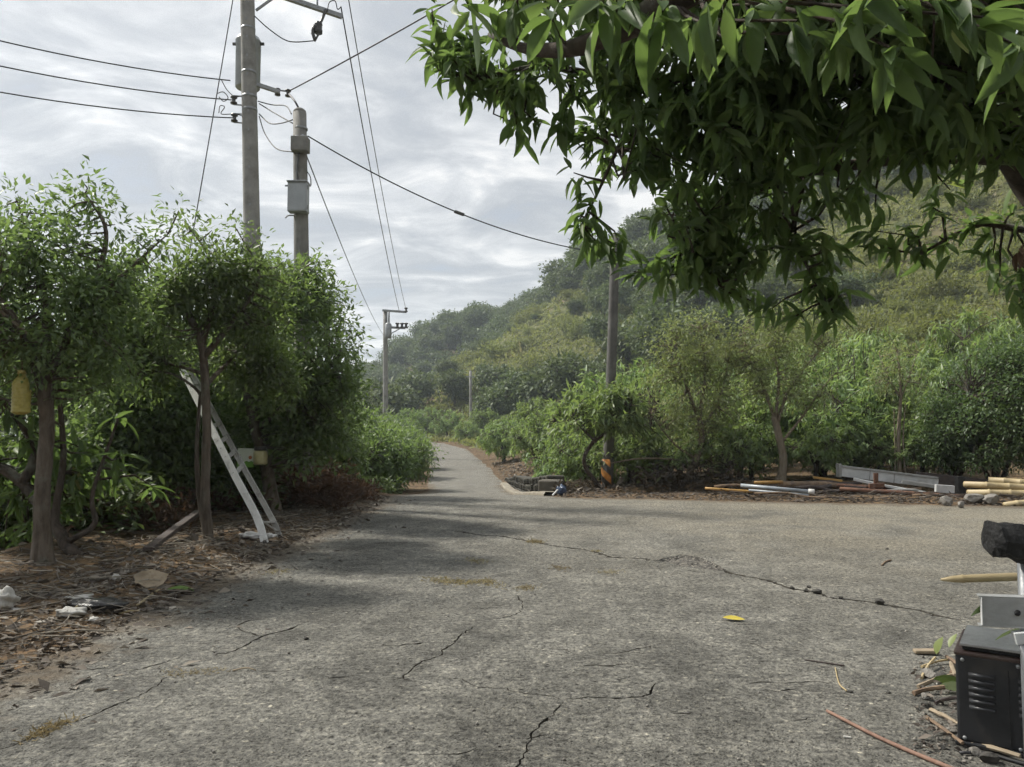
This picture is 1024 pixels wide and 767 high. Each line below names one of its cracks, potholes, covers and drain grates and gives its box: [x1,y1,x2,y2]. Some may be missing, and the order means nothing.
crack [385,627,656,767]
crack [209,618,300,654]
crack [0,643,191,750]
crack [456,531,961,620]
